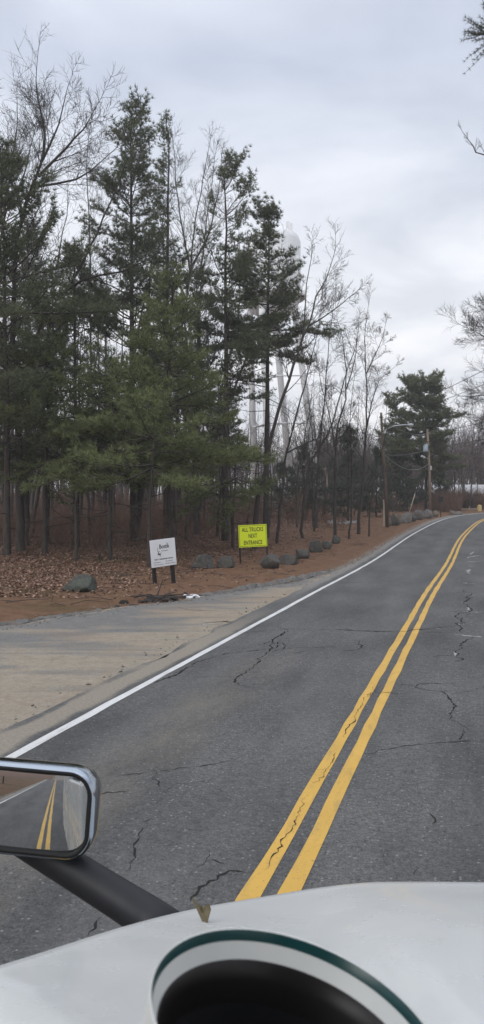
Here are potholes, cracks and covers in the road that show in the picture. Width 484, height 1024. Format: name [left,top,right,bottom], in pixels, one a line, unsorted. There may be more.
crack [155,592,481,687]
crack [266,804,304,869]
crack [128,819,150,870]
crack [103,759,236,794]
crack [189,853,243,901]
crack [316,682,484,782]
